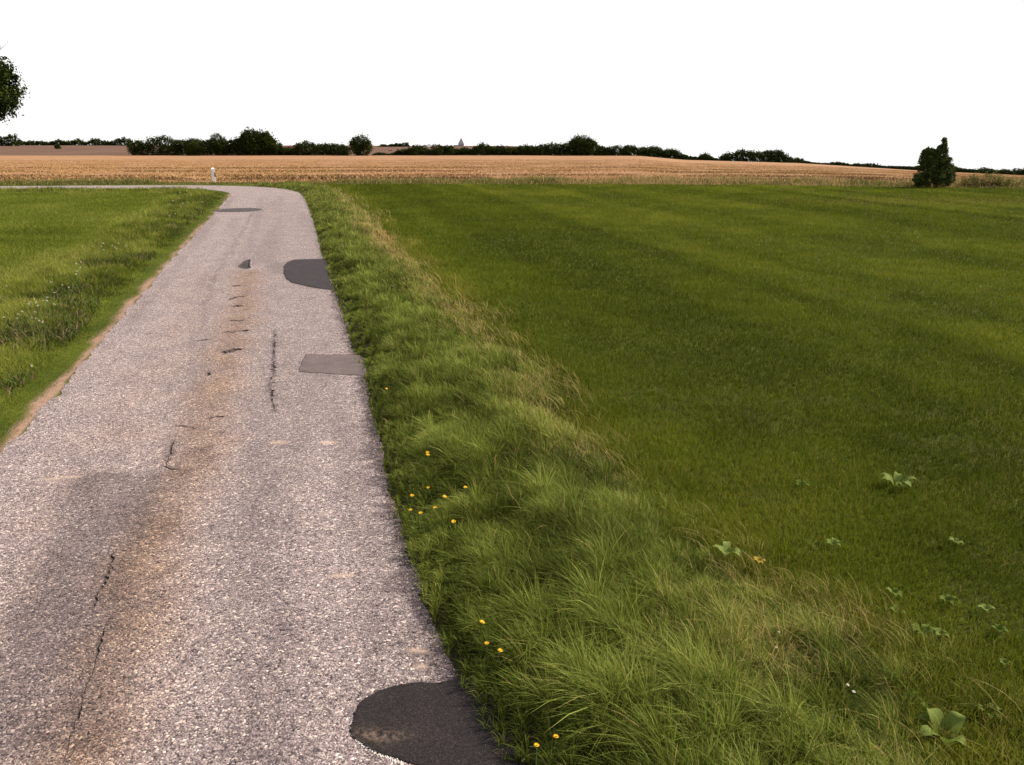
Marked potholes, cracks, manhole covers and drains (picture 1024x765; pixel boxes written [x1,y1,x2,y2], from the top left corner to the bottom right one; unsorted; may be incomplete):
crack [199,285,248,353]
crack [64,552,115,760]
crack [165,416,224,470]
crack [268,331,277,410]
